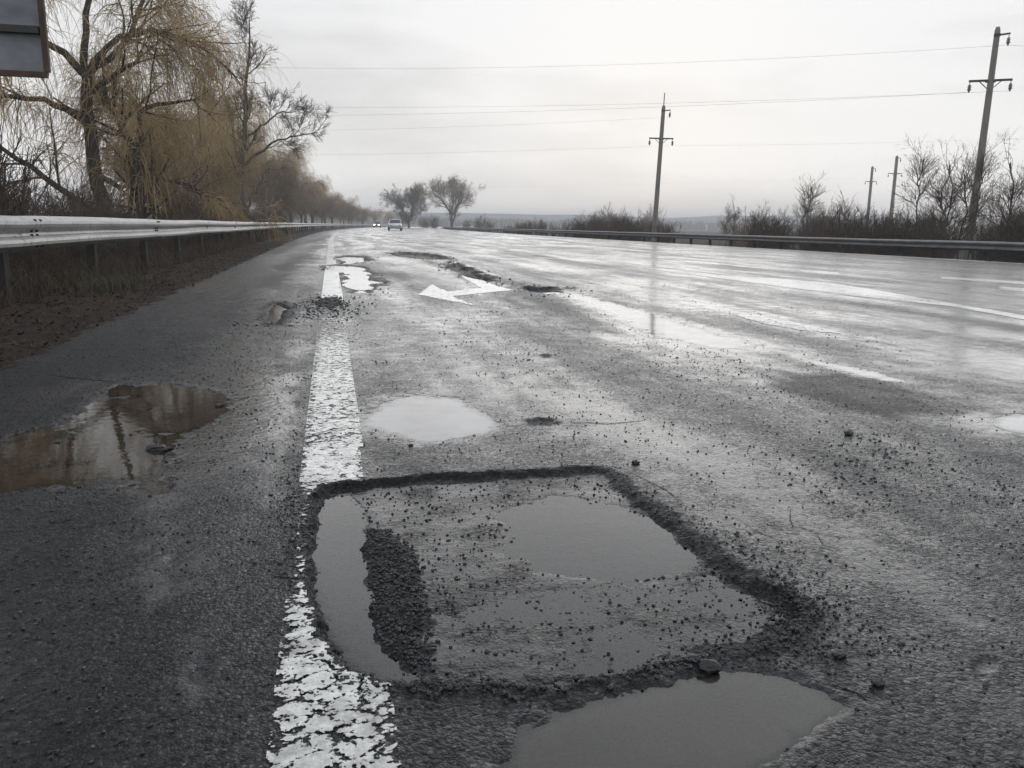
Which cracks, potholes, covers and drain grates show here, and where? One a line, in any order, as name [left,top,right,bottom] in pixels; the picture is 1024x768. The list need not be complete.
pothole [523,417,562,426]
pothole [524,286,575,294]
pothole [440,263,498,282]
pothole [260,302,292,325]
pothole [392,251,452,260]
pothole [322,264,389,293]
pothole [301,465,811,689]
